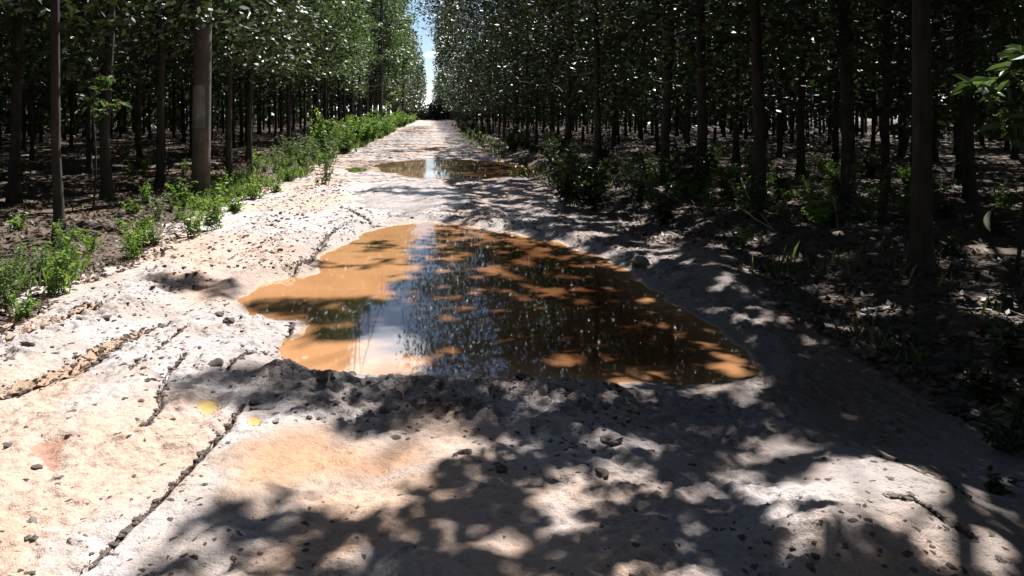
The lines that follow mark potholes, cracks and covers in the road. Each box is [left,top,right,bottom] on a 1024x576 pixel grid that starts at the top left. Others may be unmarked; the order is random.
crack [128,322,189,427]
pothole [365,159,535,179]
crack [81,407,241,570]
pothole [235,221,766,386]
crack [886,494,978,539]
